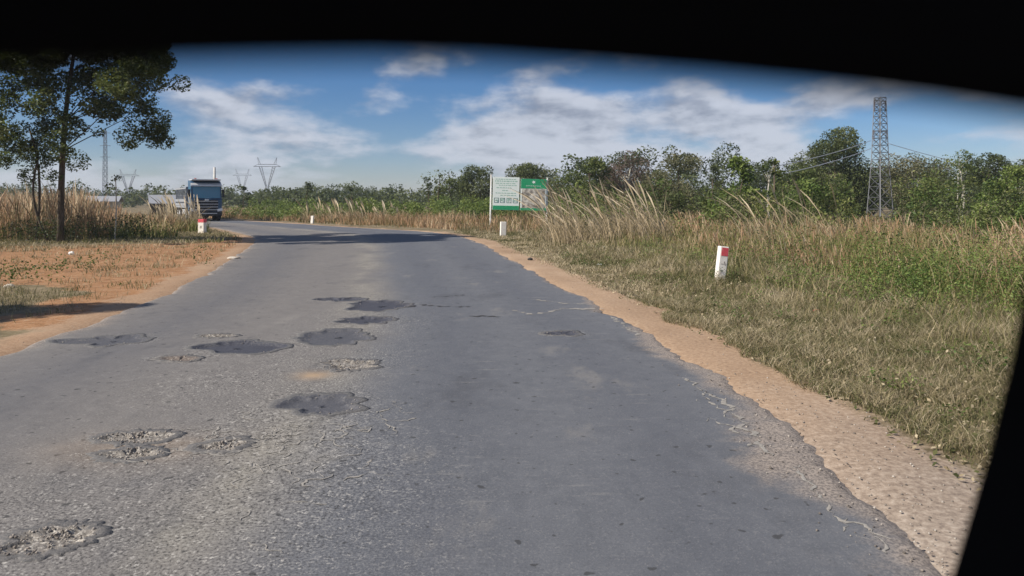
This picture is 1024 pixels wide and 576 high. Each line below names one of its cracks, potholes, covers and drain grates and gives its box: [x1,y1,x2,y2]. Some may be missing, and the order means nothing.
pothole [85,443,171,464]
pothole [86,428,188,448]
pothole [314,358,383,373]
pothole [151,354,206,363]
pothole [0,519,113,563]
pothole [182,435,259,454]
crack [682,377,774,461]
crack [408,295,640,336]
crack [793,465,890,553]
